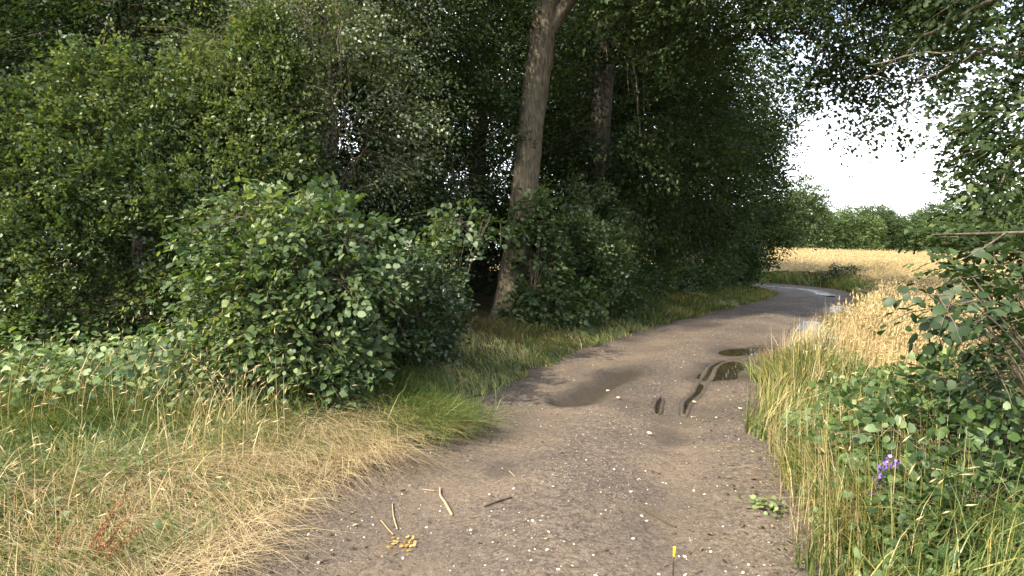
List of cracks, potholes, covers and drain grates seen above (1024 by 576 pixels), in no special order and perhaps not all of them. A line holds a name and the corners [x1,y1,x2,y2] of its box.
pothole [710,344,784,358]
pothole [688,359,758,385]
